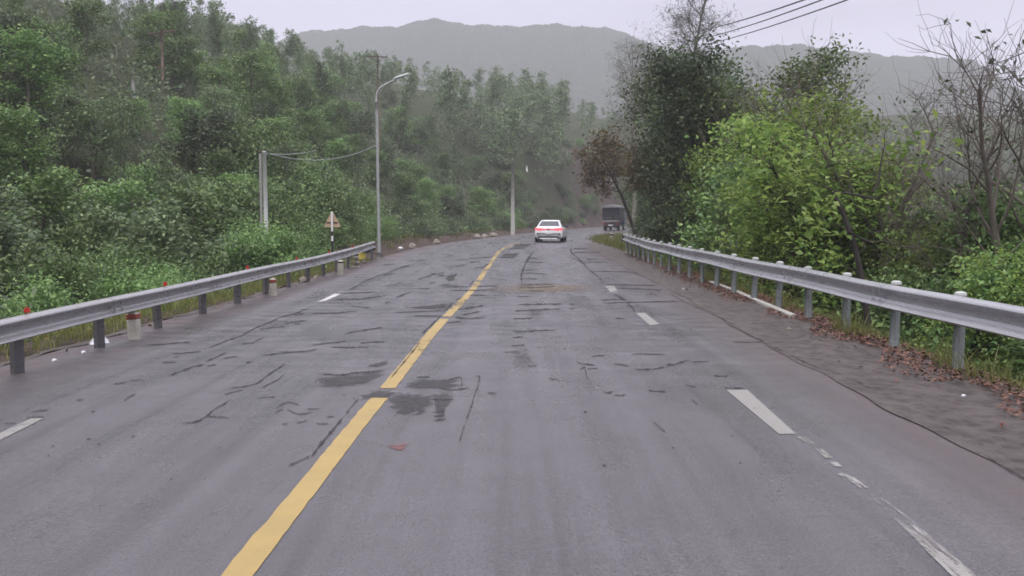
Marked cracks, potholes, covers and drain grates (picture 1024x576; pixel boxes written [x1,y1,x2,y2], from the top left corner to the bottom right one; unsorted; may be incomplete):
crack [570,248,674,319]
crack [149,244,574,465]
crack [578,353,742,388]
